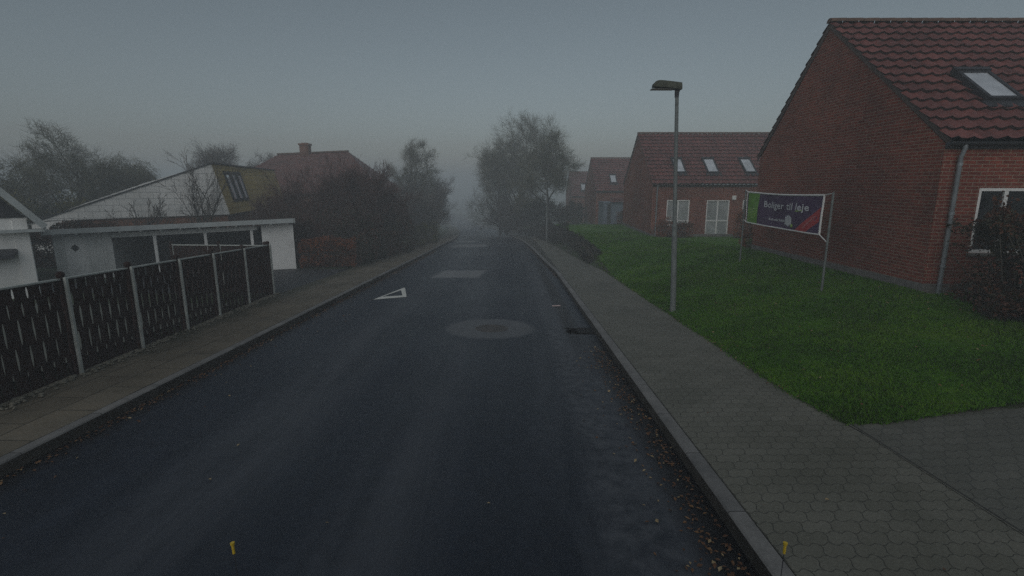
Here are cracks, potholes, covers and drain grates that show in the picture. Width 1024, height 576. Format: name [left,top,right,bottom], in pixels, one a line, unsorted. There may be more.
manhole cover [475,324,508,332]
